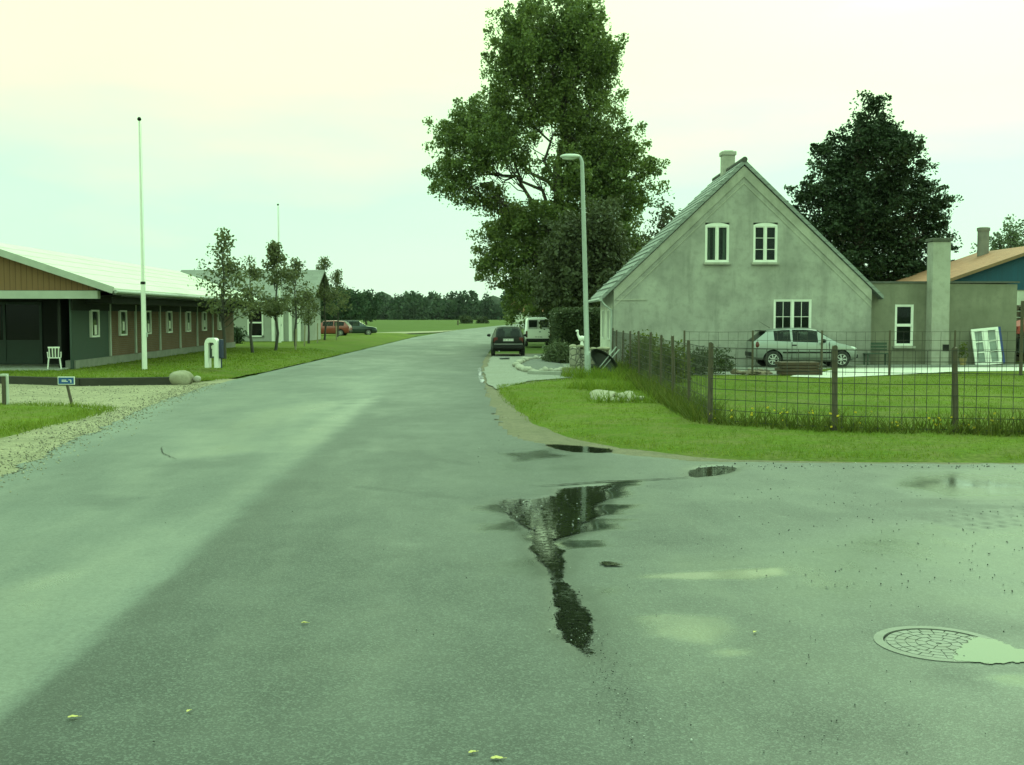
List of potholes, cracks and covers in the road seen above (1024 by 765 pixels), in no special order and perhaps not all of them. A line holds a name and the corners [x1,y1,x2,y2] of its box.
manhole cover [874,626,993,663]
